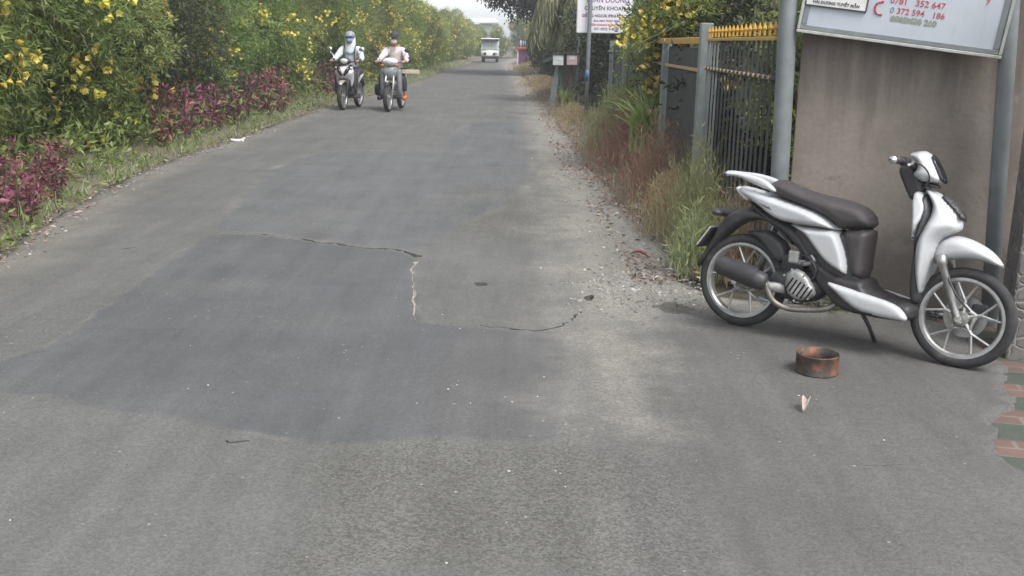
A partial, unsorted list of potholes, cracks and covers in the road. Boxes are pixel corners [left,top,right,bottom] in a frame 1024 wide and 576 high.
crack [254,233,423,320]
crack [481,312,581,331]
